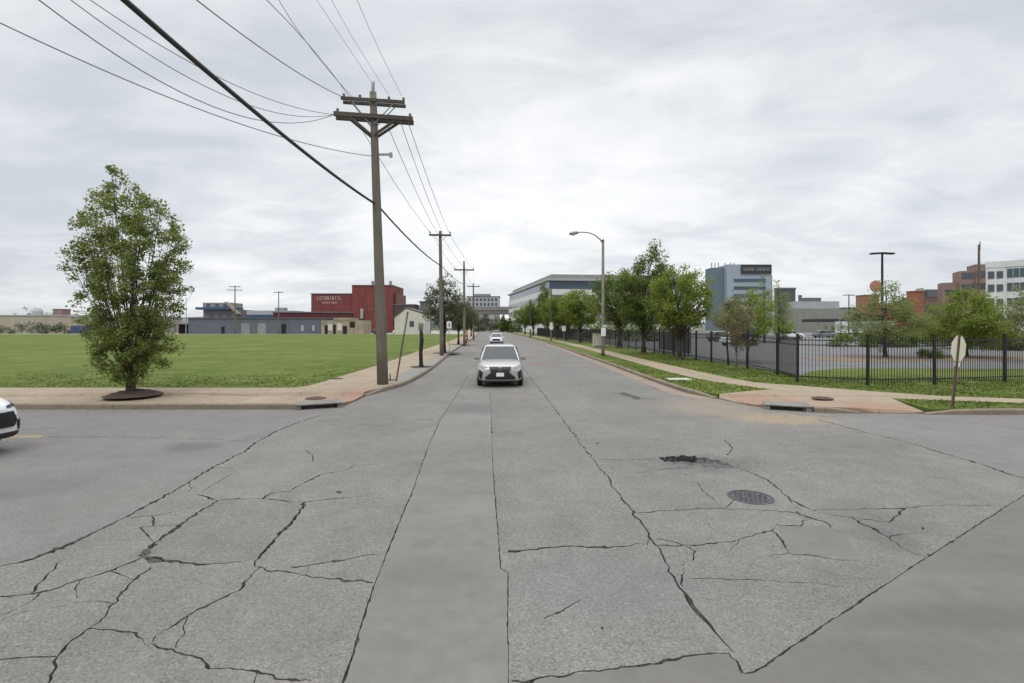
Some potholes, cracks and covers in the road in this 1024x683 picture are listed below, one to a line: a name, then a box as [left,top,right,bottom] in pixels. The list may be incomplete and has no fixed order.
crack [508,373,988,653]
crack [0,415,377,683]
drain grate [763,401,812,412]
drain grate [295,399,343,410]
pothole [658,455,734,469]
crack [820,420,1023,478]
manhole cover [727,490,775,505]
